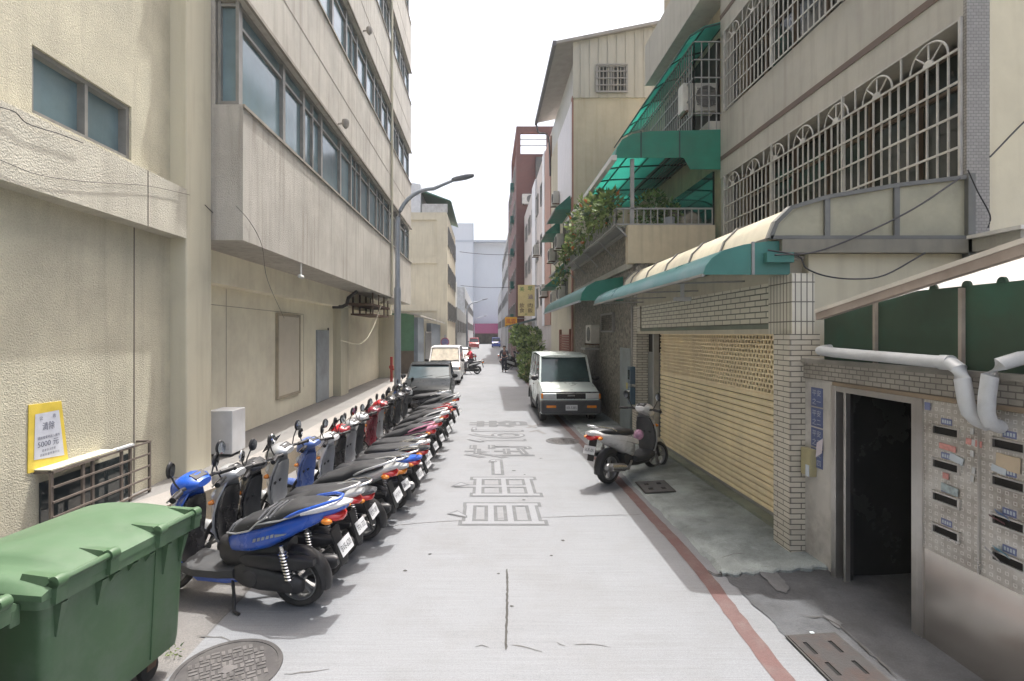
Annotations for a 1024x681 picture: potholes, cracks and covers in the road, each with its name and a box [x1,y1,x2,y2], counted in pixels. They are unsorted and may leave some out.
crack [505,569,608,652]
manhole cover [169,638,283,681]
